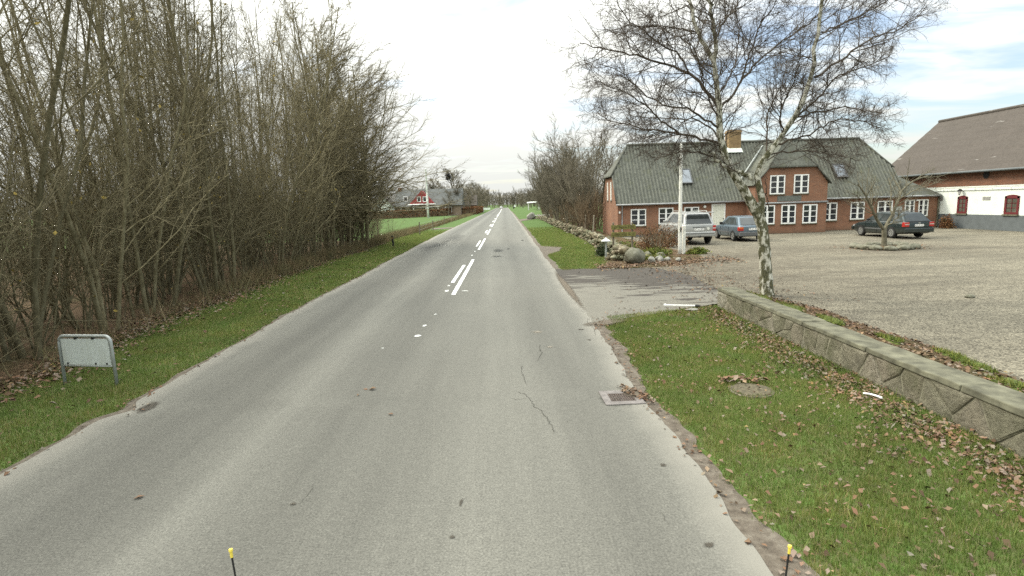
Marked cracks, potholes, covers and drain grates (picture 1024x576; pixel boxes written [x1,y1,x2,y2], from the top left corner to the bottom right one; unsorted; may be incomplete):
drain grate [598,390,646,405]
manhole cover [728,383,775,399]
